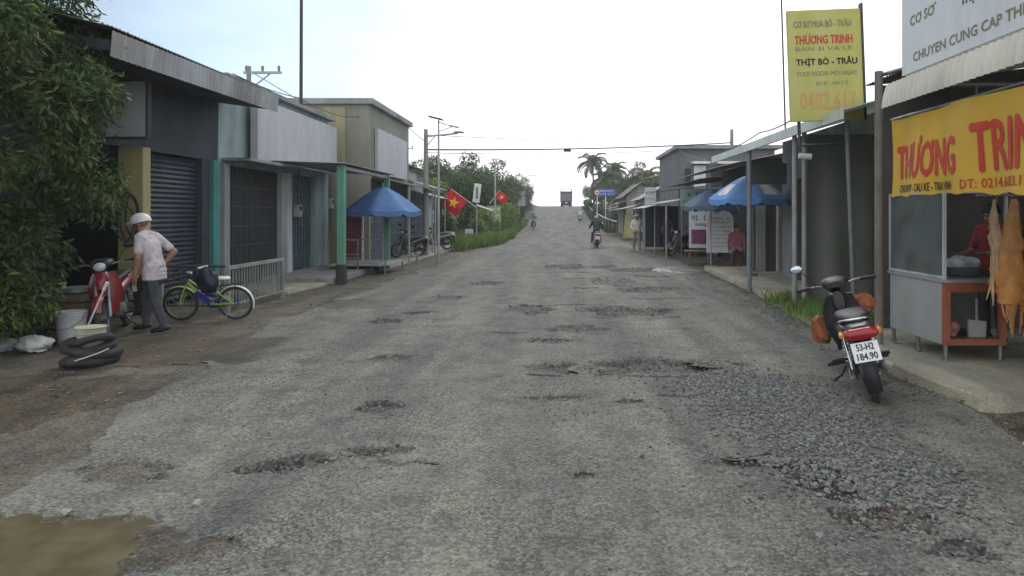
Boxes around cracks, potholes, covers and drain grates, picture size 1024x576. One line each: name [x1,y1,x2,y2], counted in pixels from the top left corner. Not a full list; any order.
pothole [566,305,690,319]
pothole [504,303,561,317]
pothole [212,448,353,477]
pothole [514,394,598,402]
pothole [512,361,606,377]
pothole [567,355,740,378]
pothole [364,353,420,361]
pothole [683,358,758,369]
pothole [329,443,428,460]
pothole [693,455,780,469]
pothole [815,498,957,539]
